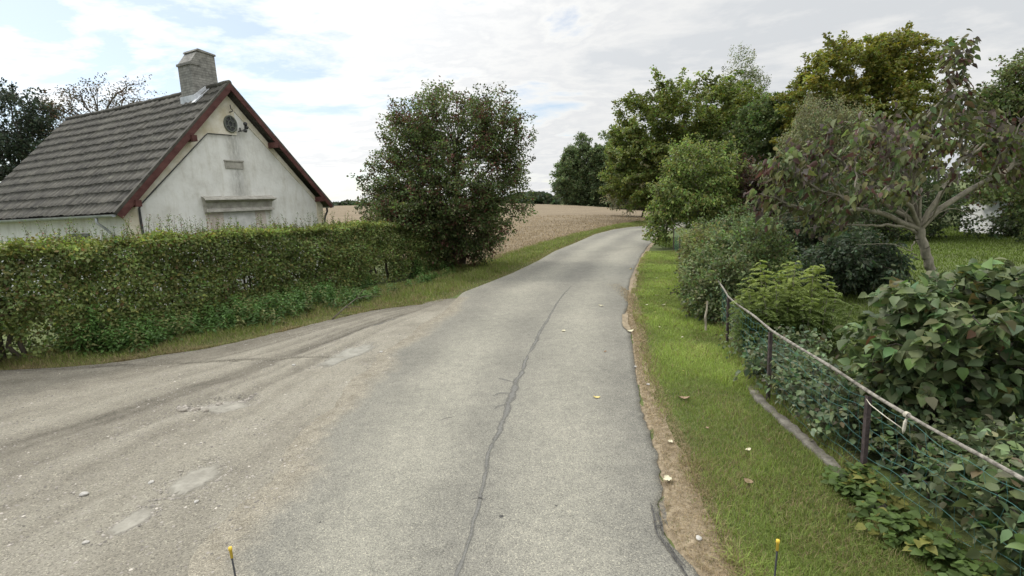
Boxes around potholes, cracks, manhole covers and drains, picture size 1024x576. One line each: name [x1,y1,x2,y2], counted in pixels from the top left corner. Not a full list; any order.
pothole [193,402,248,413]
crack [442,285,572,576]
crack [650,502,688,576]
